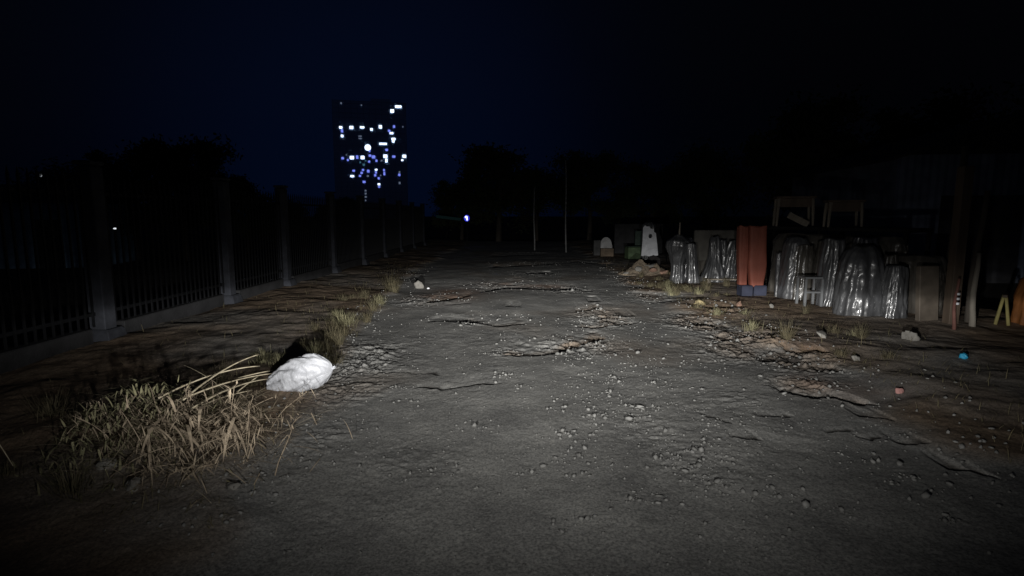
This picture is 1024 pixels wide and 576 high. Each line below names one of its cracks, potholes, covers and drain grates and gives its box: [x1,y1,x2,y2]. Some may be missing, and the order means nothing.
pothole [769,378,880,406]
crack [369,369,502,390]
pothole [498,328,610,357]
crack [683,317,806,364]
